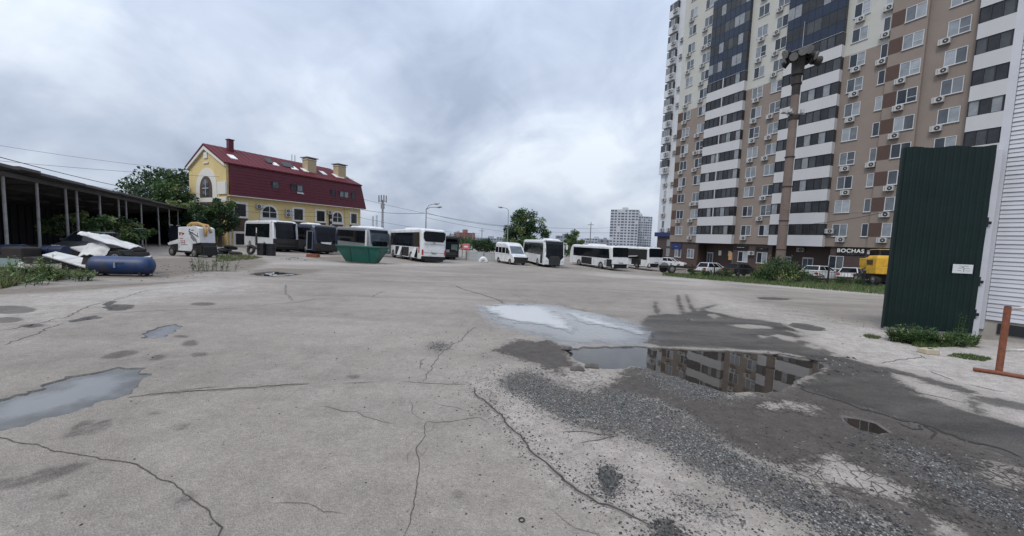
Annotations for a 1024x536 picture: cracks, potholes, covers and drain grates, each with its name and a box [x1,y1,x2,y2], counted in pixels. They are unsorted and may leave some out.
pothole [564,346,828,393]
crack [0,437,223,536]
crack [133,383,309,397]
crack [753,353,1024,524]
pothole [598,465,621,495]
crack [351,313,654,535]
pothole [840,415,893,435]
